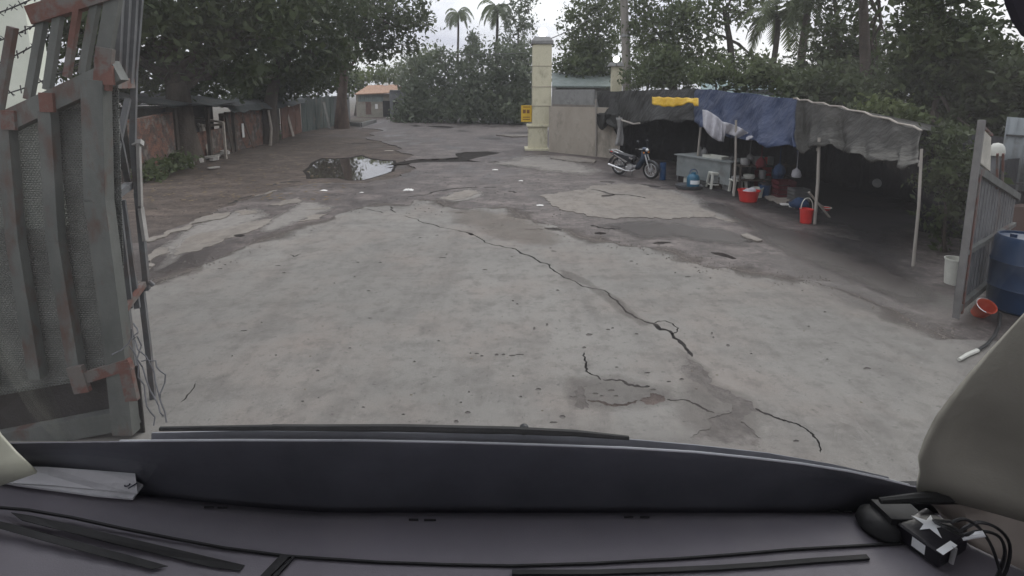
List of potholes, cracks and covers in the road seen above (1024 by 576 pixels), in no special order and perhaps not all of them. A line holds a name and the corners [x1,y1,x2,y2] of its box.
crack [755,408,822,452]
crack [369,187,693,357]
crack [667,399,714,413]
crack [582,353,650,407]
pothole [303,155,397,181]
